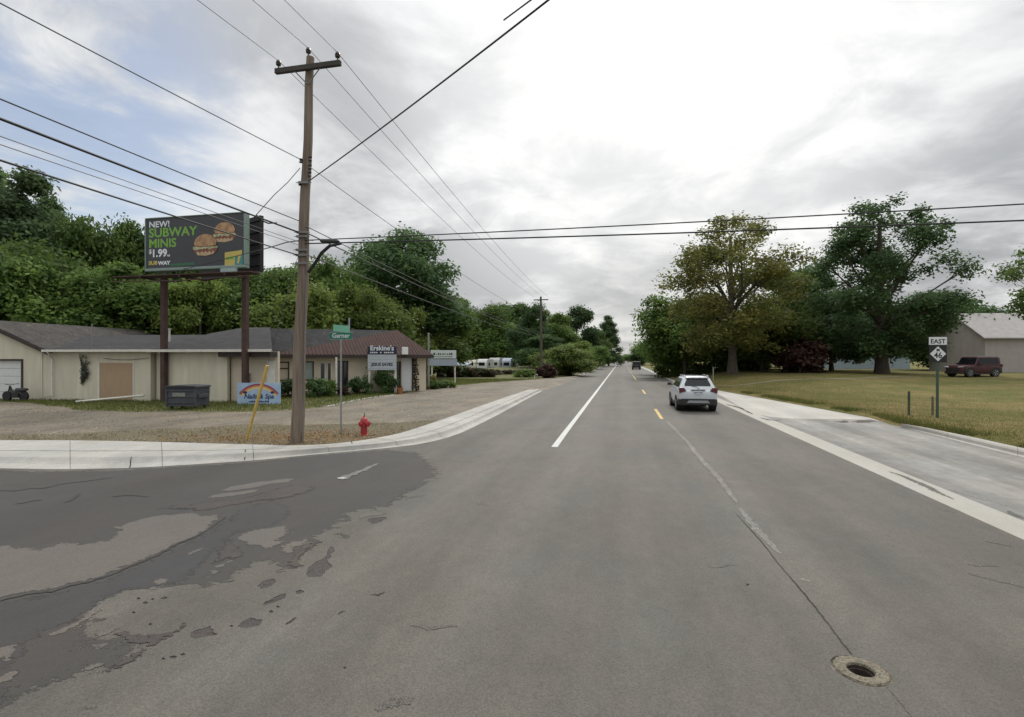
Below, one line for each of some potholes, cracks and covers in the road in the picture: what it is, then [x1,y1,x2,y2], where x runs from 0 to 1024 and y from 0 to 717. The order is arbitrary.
crack [967,564,1024,587]
manhole cover [830,655,893,687]
crack [891,472,955,513]
